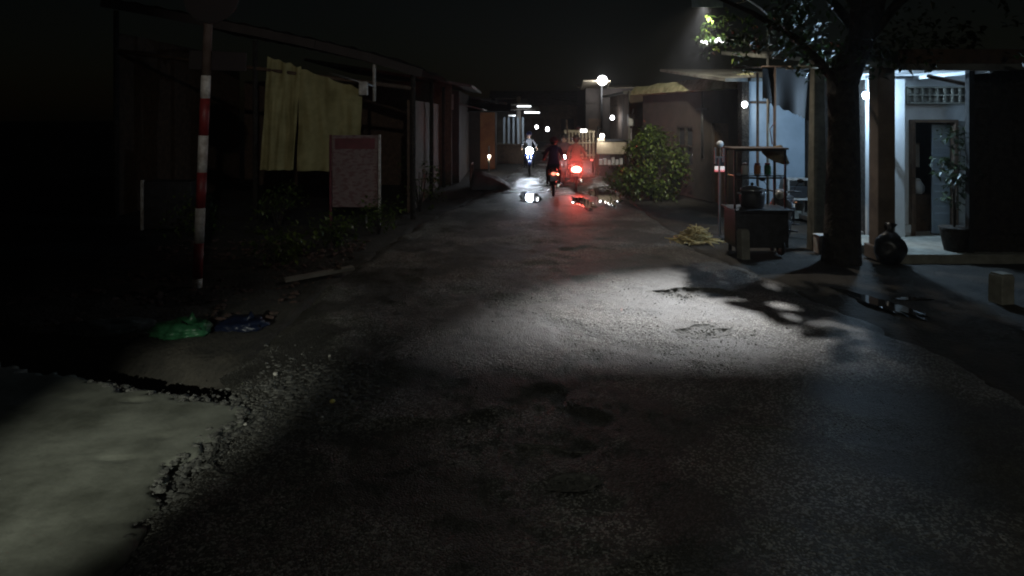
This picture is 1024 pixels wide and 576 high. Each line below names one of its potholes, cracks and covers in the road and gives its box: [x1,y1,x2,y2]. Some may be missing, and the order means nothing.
pothole [671,323,734,339]
pothole [644,286,743,299]
